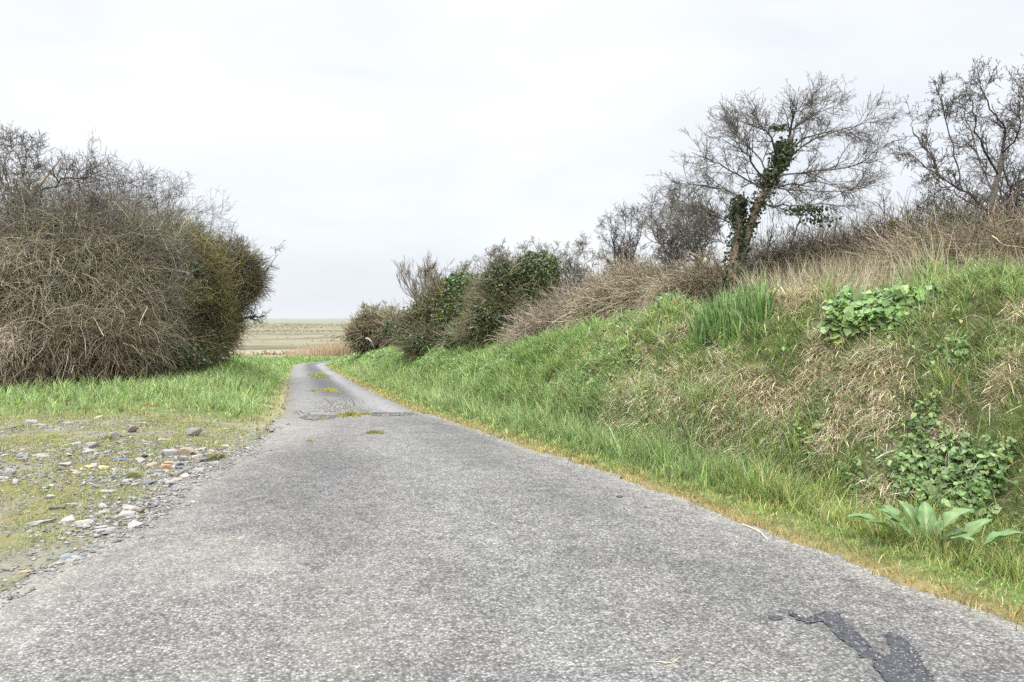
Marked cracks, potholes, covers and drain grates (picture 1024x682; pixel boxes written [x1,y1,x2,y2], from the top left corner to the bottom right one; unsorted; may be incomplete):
crack [286,397,361,415]
